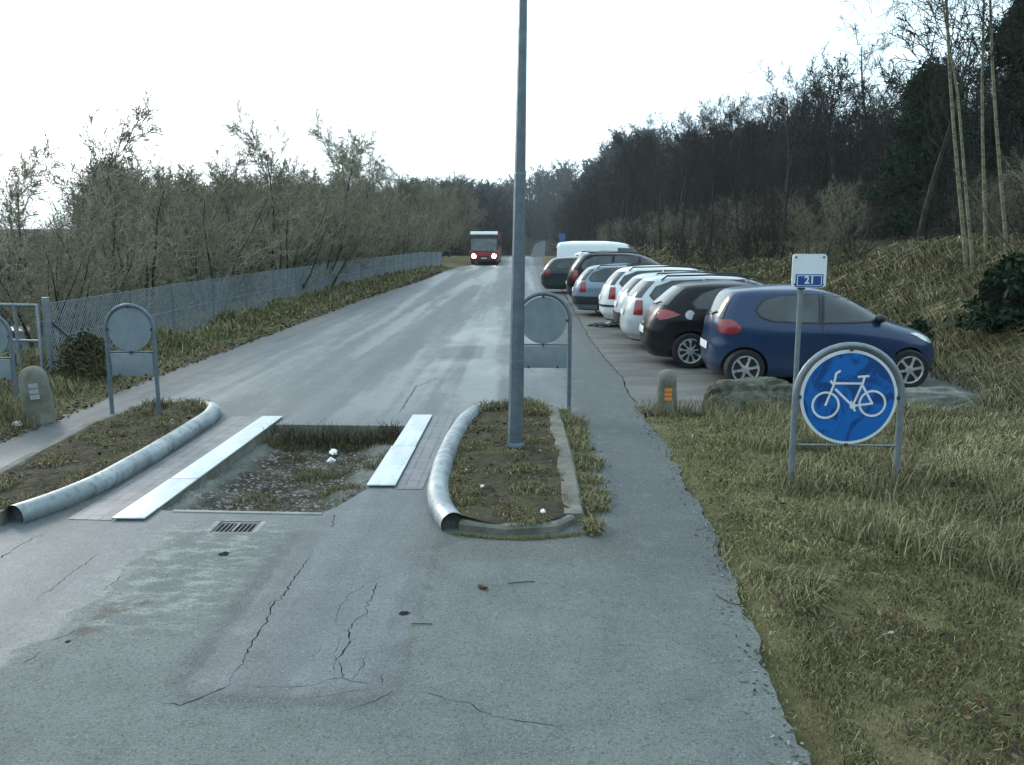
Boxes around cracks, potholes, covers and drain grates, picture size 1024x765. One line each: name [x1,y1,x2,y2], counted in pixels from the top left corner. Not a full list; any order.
crack [163,553,313,706]
drain grate [204,521,267,532]
crack [253,576,392,711]
crack [411,691,569,731]
crack [568,301,640,412]
